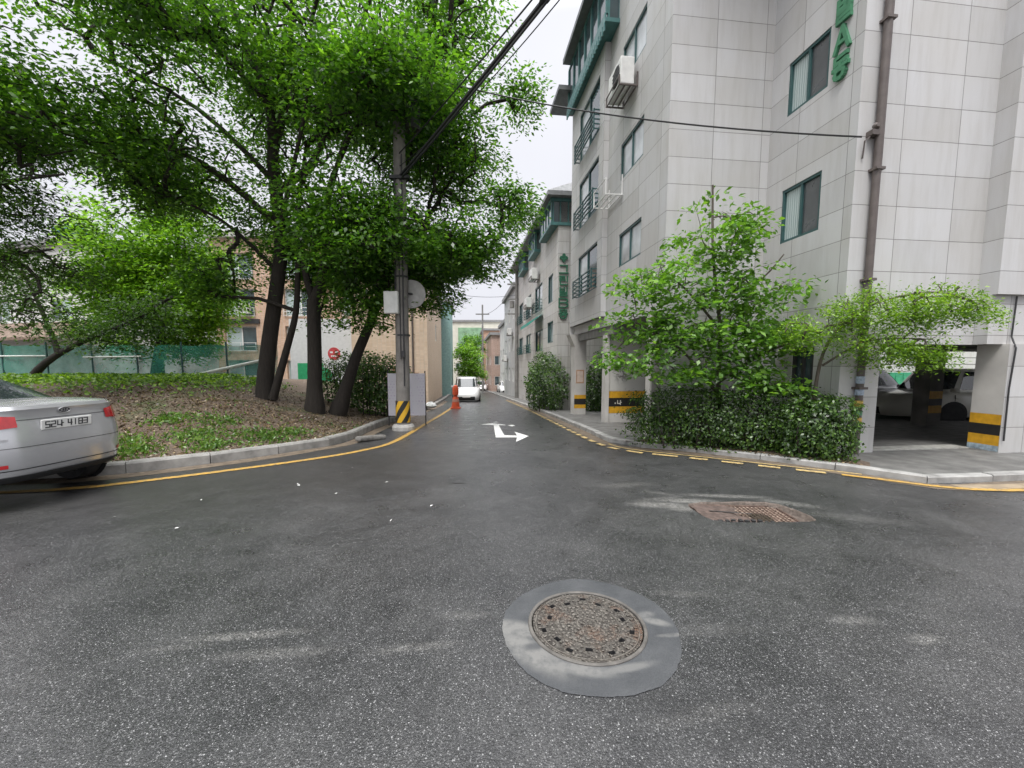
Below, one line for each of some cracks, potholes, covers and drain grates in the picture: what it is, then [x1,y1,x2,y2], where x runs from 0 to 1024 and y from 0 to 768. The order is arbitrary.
manhole cover [528,591,648,667]
